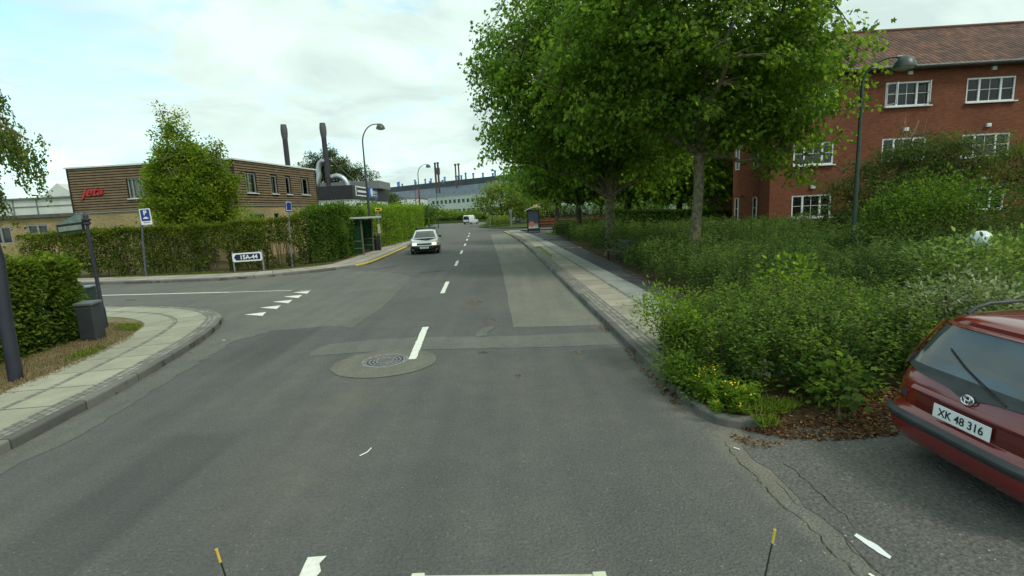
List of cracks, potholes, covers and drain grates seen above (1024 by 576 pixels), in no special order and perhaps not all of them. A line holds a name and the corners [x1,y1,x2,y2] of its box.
manhole cover [361,354,409,368]
crack [725,441,883,576]
